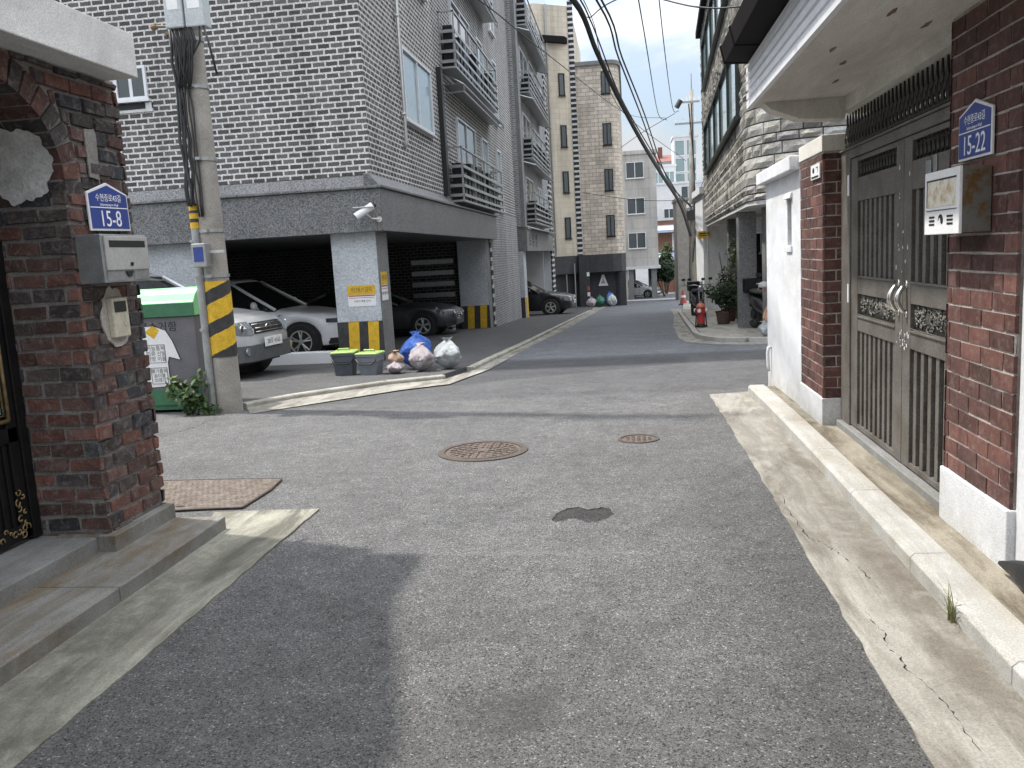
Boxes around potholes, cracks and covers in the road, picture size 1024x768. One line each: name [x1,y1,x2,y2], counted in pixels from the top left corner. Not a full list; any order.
manhole cover [438,440,528,462]
crack [867,613,982,752]
crack [779,488,879,589]
manhole cover [618,434,660,444]
